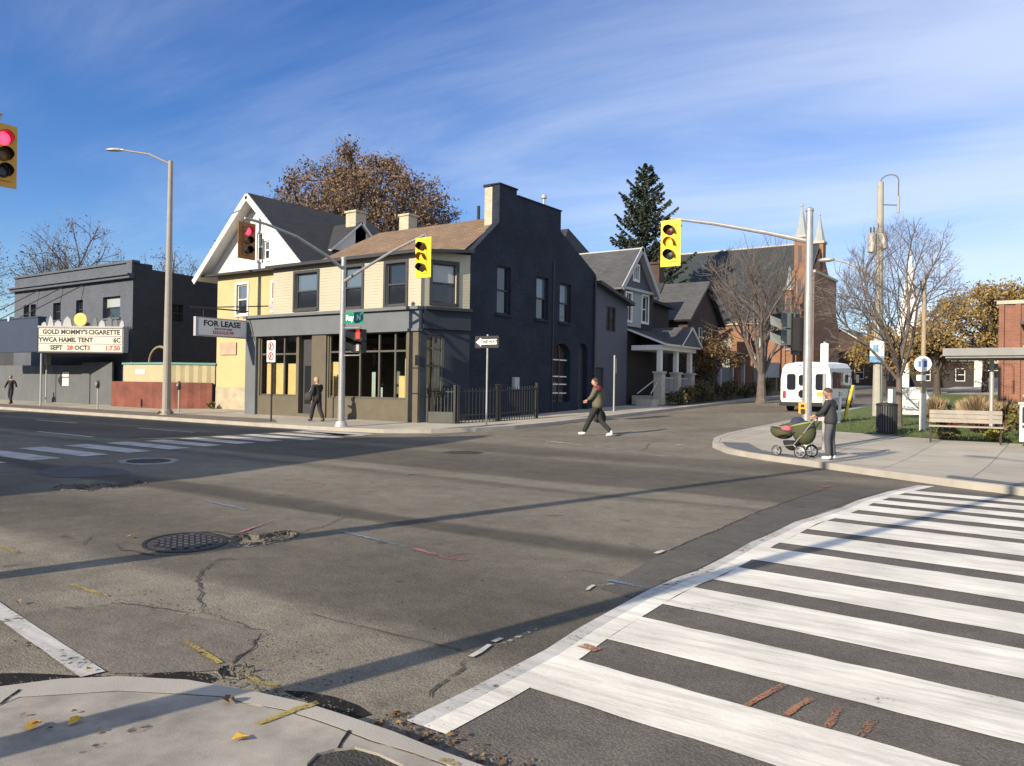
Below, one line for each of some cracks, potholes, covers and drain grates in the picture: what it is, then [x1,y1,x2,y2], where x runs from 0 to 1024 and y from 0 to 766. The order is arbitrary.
pothole [224,530,301,547]
manhole cover [142,532,229,553]
crack [116,501,364,668]
crack [429,660,465,698]
